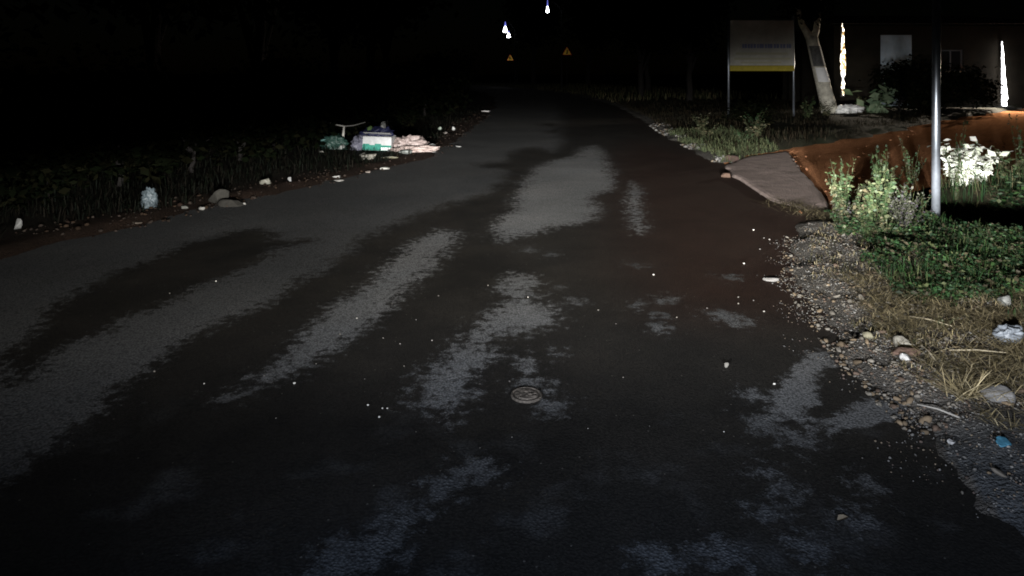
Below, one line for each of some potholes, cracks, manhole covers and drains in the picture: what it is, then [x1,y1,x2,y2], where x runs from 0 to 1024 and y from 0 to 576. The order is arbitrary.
manhole cover [511,387,542,403]
